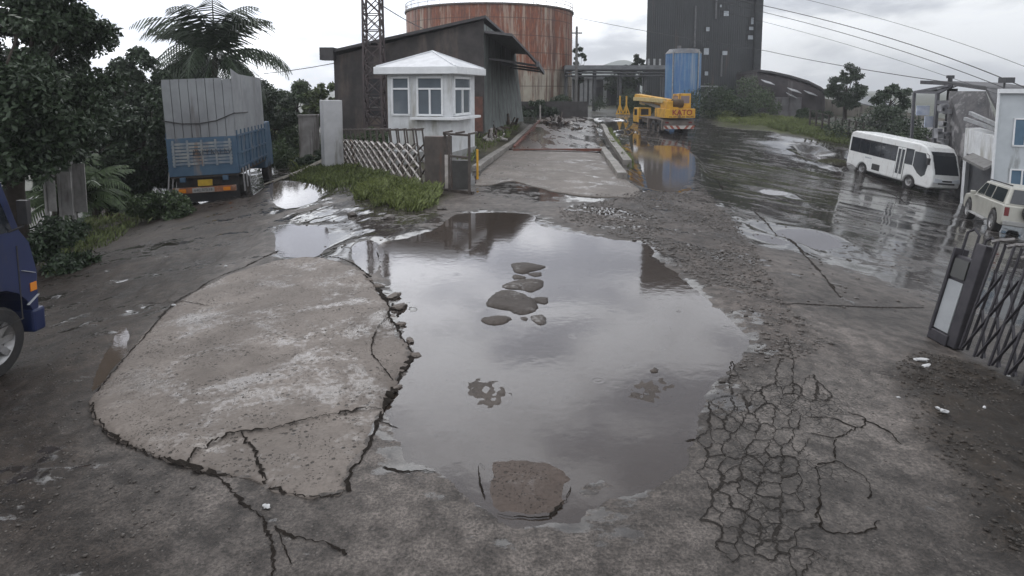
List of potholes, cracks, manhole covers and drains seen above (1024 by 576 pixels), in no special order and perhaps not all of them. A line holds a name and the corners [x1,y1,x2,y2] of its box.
crack [90,256,435,576]
pothole [267,181,320,209]
pothole [376,212,750,529]
pothole [275,225,330,258]
crack [686,343,901,576]
pothole [351,240,380,274]
